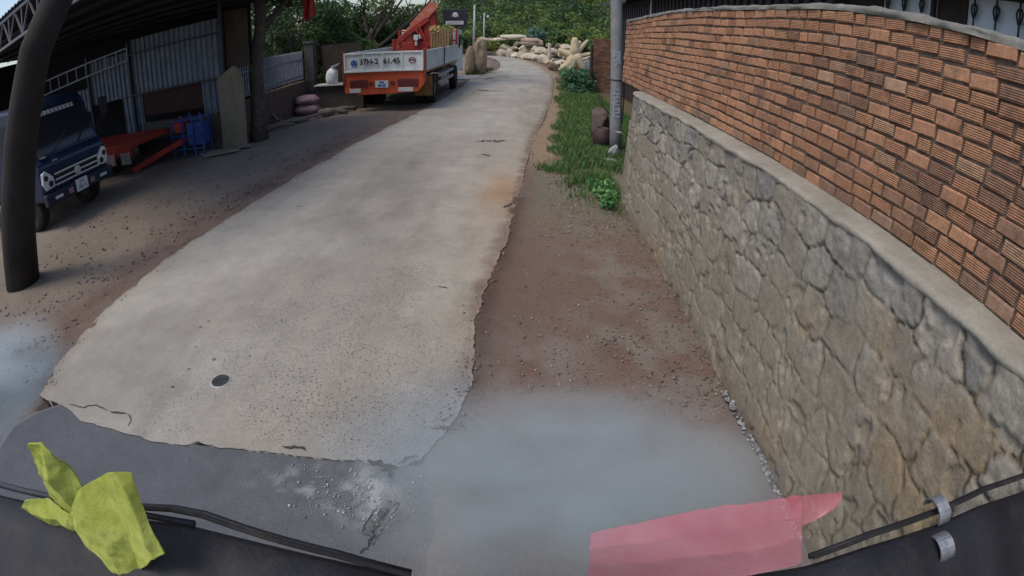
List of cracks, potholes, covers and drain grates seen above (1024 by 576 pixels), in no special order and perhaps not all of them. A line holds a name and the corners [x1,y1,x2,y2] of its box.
crack [70,404,131,426]
crack [360,530,375,554]
manhole cover [210,373,231,388]
